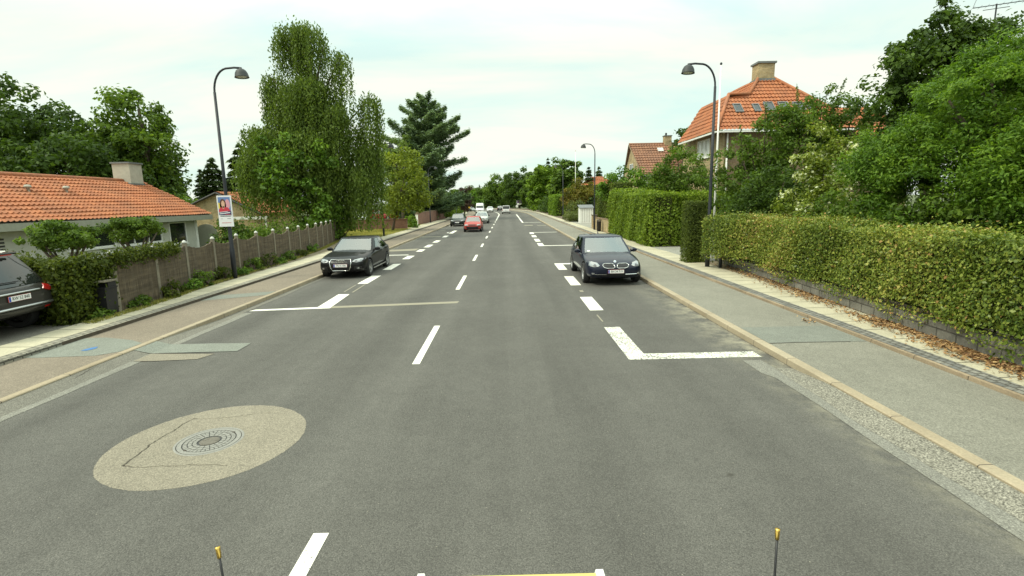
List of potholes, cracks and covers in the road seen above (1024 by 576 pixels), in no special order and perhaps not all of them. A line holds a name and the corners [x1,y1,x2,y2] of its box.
manhole cover [173,427,244,456]
